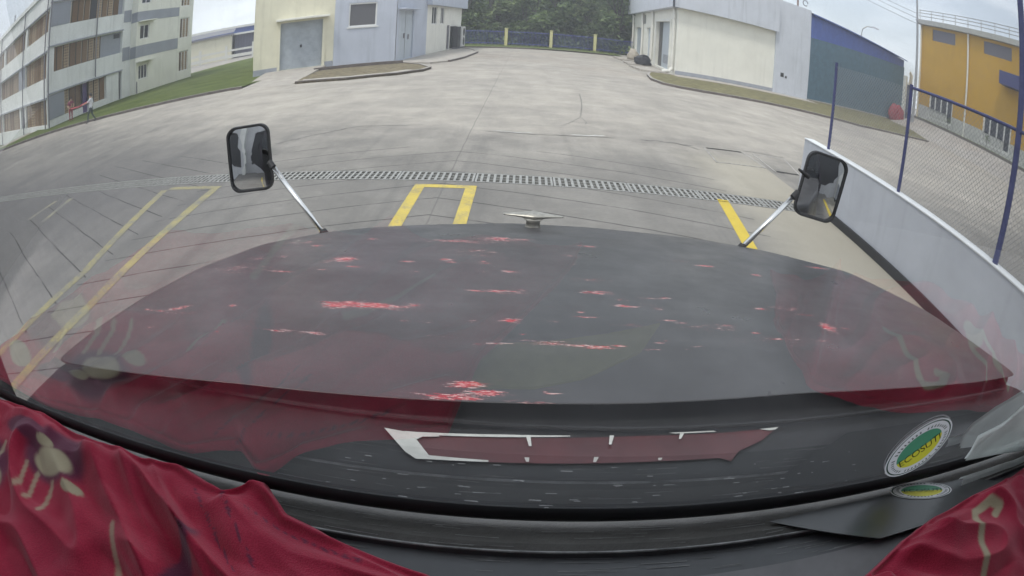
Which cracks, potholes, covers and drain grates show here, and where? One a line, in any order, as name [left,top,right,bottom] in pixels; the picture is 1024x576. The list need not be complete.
drain grate [274,171,334,181]
drain grate [397,171,476,182]
drain grate [552,177,631,192]
drain grate [695,190,766,208]
drain grate [325,171,403,180]
drain grate [757,198,795,212]
drain grate [474,173,553,186]
drain grate [626,183,703,200]
